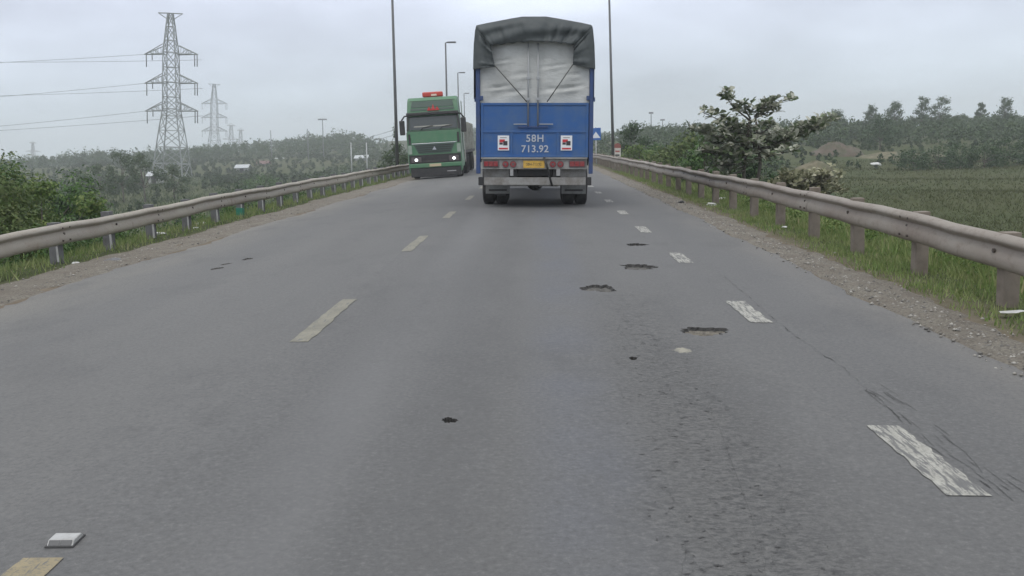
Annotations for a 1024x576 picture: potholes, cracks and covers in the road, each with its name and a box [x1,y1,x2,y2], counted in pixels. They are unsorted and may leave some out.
pothole [680,327,728,336]
pothole [580,284,616,292]
crack [725,277,1023,502]
